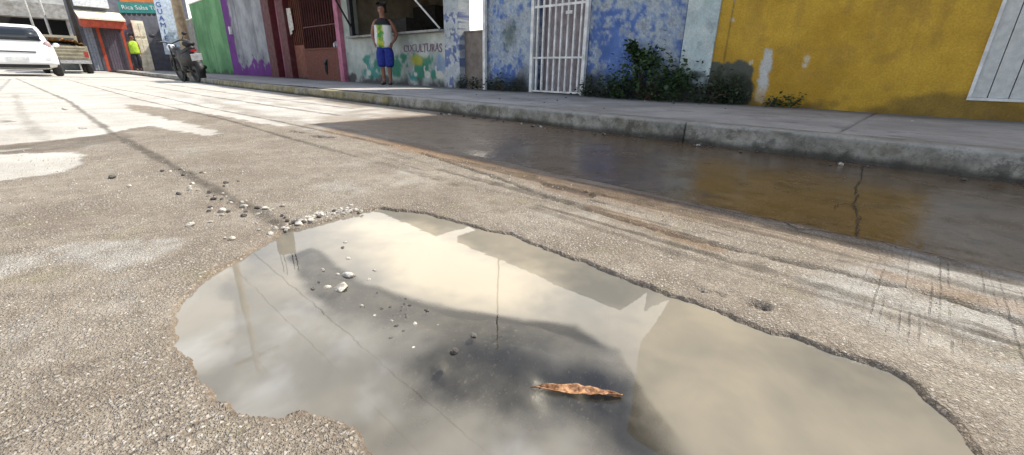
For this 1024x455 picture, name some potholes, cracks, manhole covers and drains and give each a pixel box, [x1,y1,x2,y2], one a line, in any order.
pothole [164,207,984,455]
crack [691,164,971,265]
